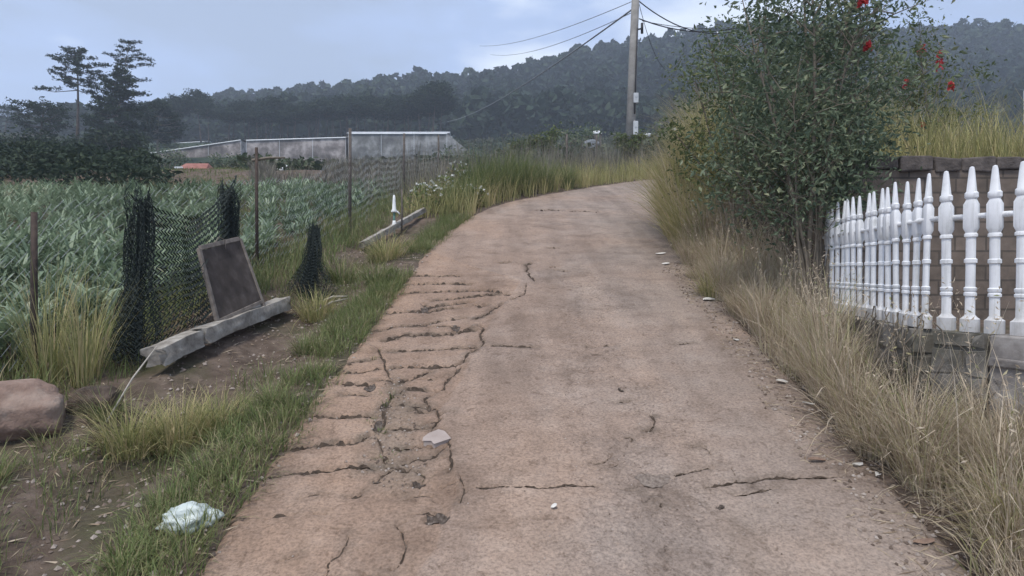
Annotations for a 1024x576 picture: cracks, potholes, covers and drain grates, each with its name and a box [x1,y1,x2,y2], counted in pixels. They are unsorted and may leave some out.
crack [732,470,772,496]
crack [262,263,535,557]
crack [326,537,349,576]
pothole [425,513,450,525]
